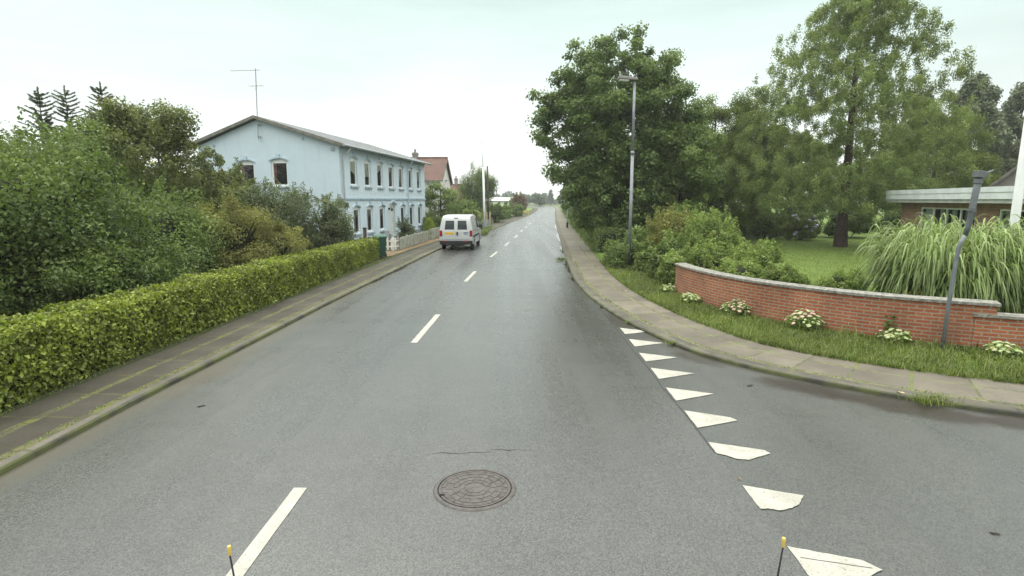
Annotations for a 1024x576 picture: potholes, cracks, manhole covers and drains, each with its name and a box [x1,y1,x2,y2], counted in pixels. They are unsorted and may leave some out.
manhole cover [433,469,516,512]
